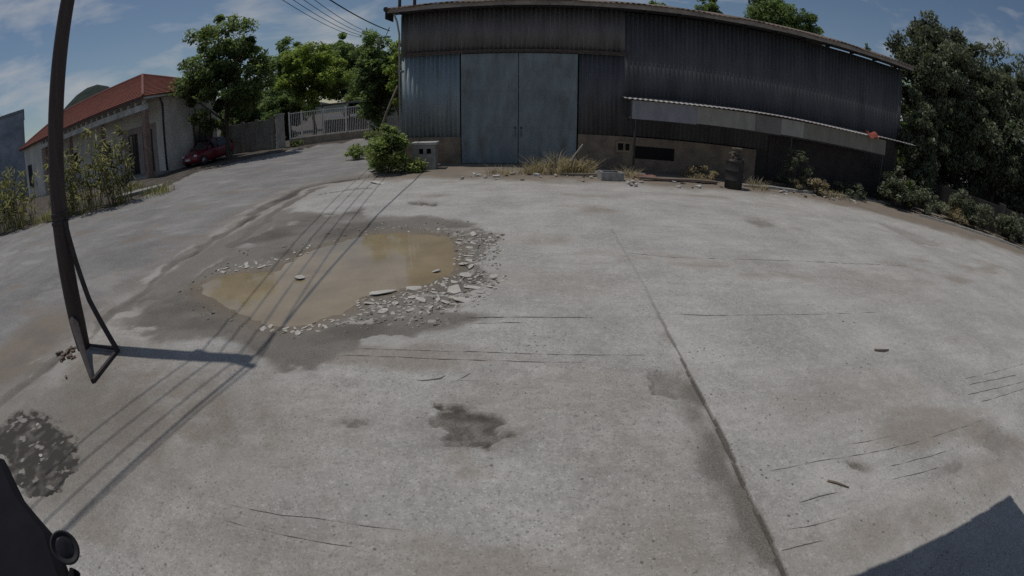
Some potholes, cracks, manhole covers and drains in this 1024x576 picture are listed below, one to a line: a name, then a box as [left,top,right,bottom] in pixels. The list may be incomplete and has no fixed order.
crack [775,519,834,551]
crack [226,506,398,547]
pothole [190,219,489,334]
crack [771,420,982,479]
crack [965,364,1023,402]
pothole [0,409,83,502]
